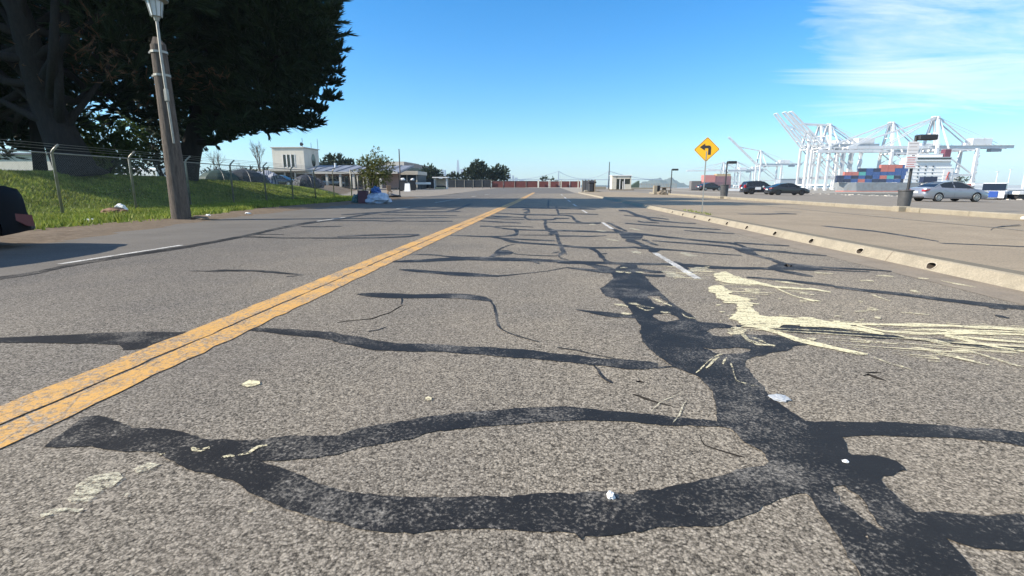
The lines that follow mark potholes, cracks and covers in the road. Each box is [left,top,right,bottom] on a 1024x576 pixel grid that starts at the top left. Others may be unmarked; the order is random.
crack [632,380,673,407]
crack [699,435,745,458]
crack [337,305,403,323]
